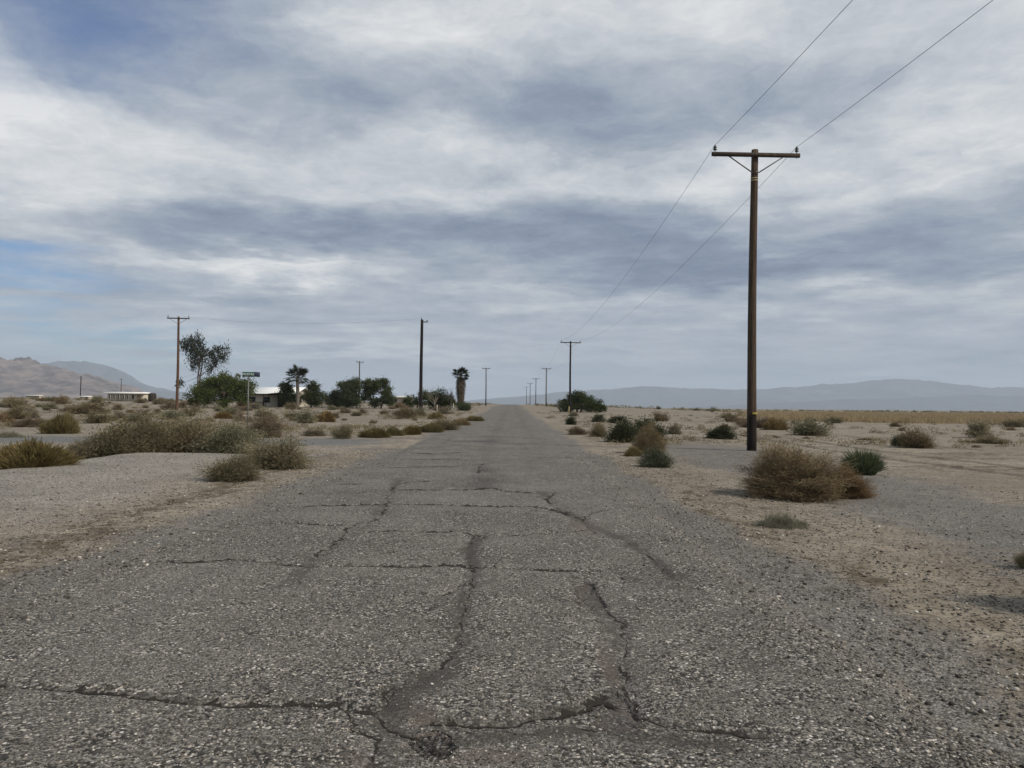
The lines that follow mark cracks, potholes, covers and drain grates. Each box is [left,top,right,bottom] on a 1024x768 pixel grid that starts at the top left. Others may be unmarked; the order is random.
pothole [408,730,459,762]
crack [0,452,766,768]
